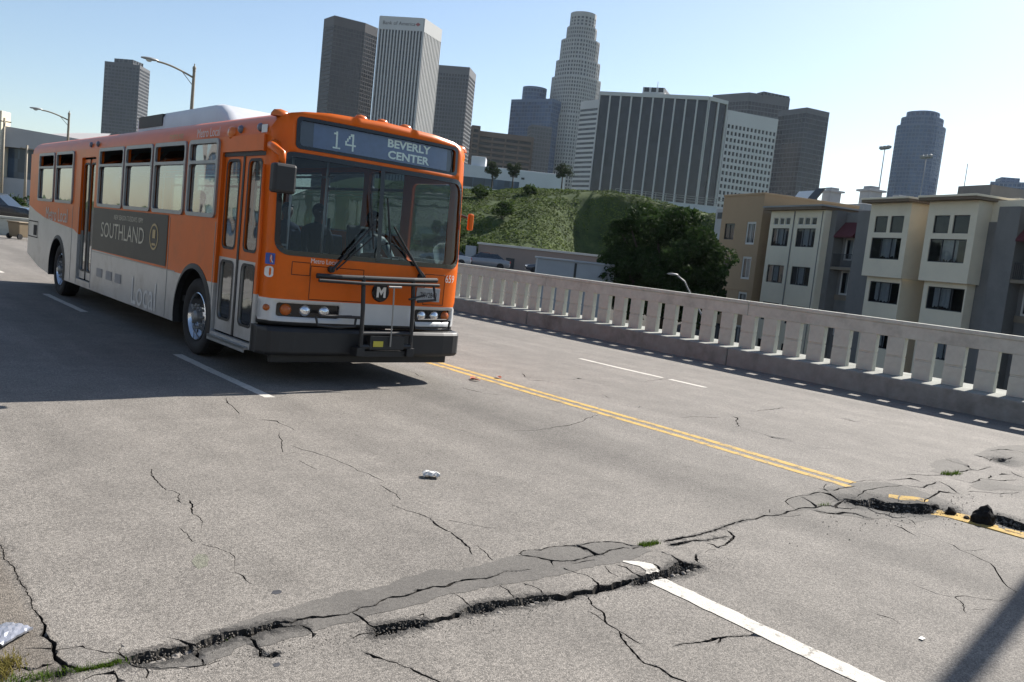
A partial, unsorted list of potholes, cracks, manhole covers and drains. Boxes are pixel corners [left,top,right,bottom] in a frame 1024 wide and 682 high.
crack [268,420,1021,682]
crack [1,546,220,682]
crack [150,469,249,583]
pothole [845,498,934,515]
pothole [995,515,1024,531]
